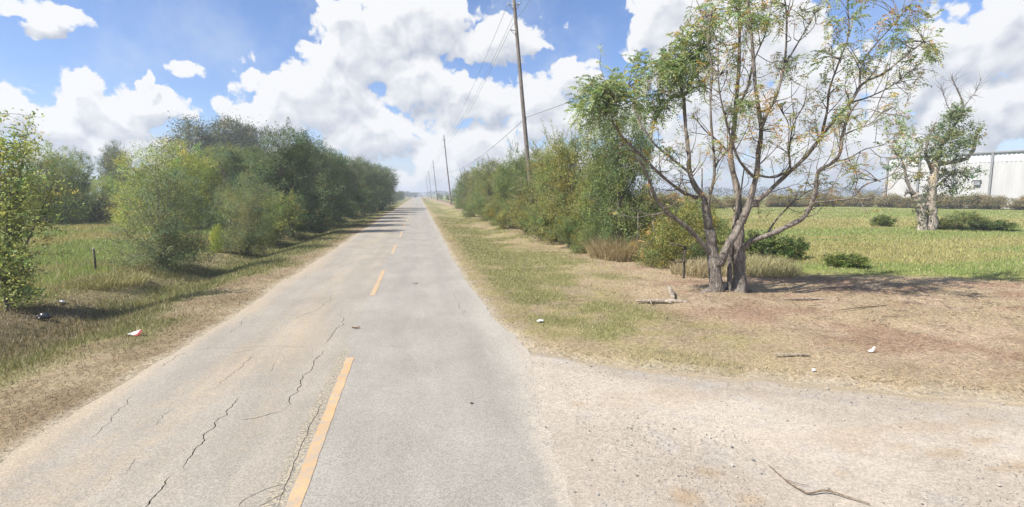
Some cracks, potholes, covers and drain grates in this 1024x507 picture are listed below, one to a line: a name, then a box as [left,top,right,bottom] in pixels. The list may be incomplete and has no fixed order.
crack [146,297,344,507]
